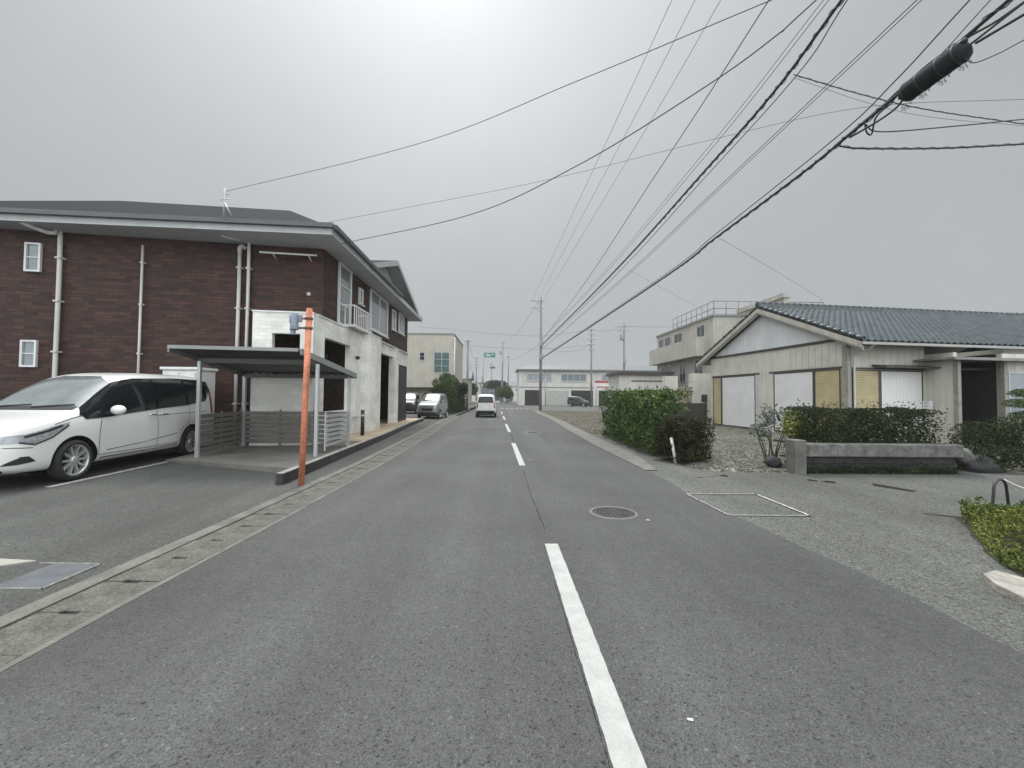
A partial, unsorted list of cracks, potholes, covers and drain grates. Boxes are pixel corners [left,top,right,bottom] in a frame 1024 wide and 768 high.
manhole cover [589,506,638,519]
